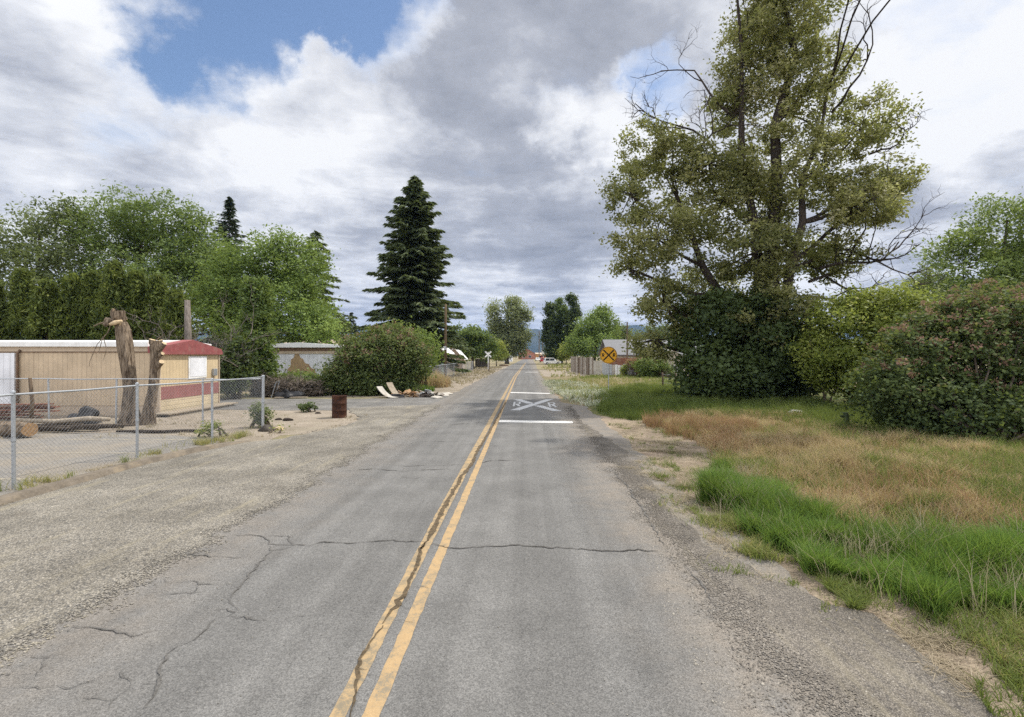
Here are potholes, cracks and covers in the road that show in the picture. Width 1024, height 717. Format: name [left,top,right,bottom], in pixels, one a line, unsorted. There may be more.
crack [433,473,664,551]
crack [13,534,412,711]
